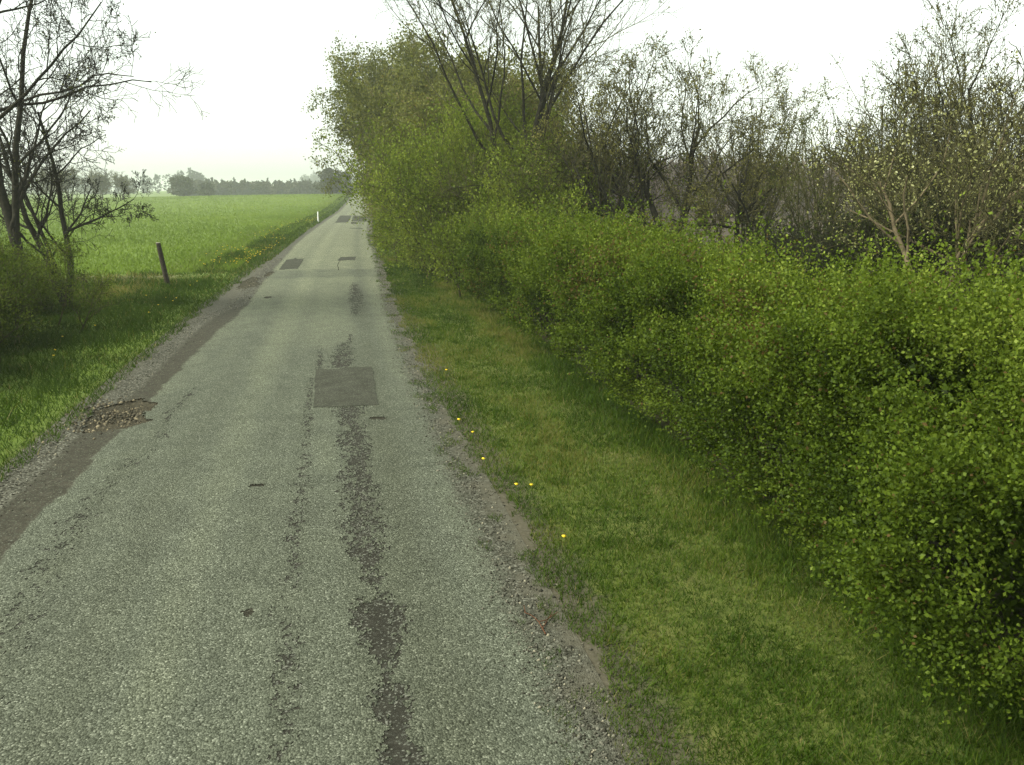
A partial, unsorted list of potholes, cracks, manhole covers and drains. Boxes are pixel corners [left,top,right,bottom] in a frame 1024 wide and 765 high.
pothole [81,398,158,432]
